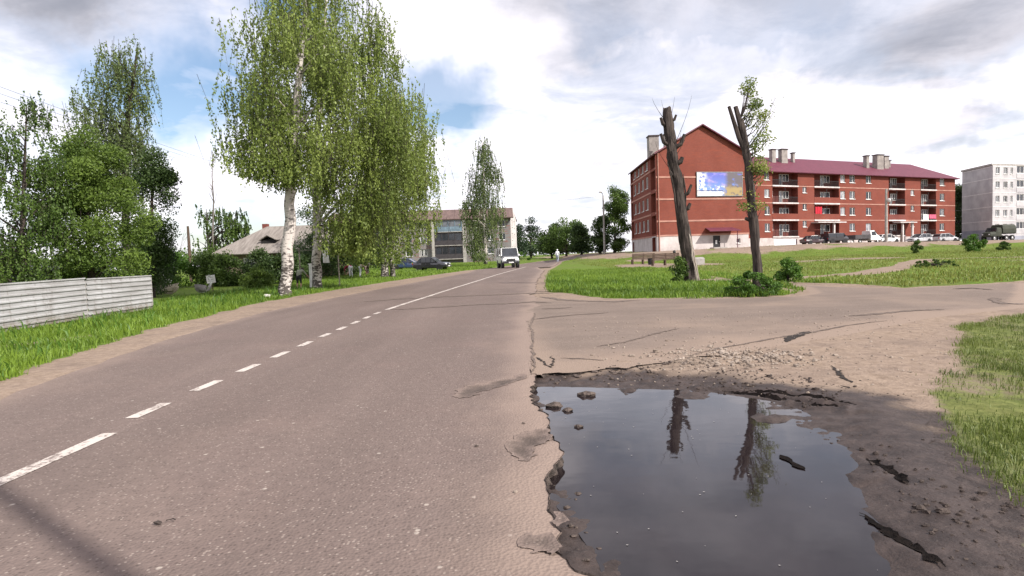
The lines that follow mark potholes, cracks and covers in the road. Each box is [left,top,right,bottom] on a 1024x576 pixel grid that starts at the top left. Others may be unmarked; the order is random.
pothole [533,357,1016,576]
crack [537,328,679,375]
